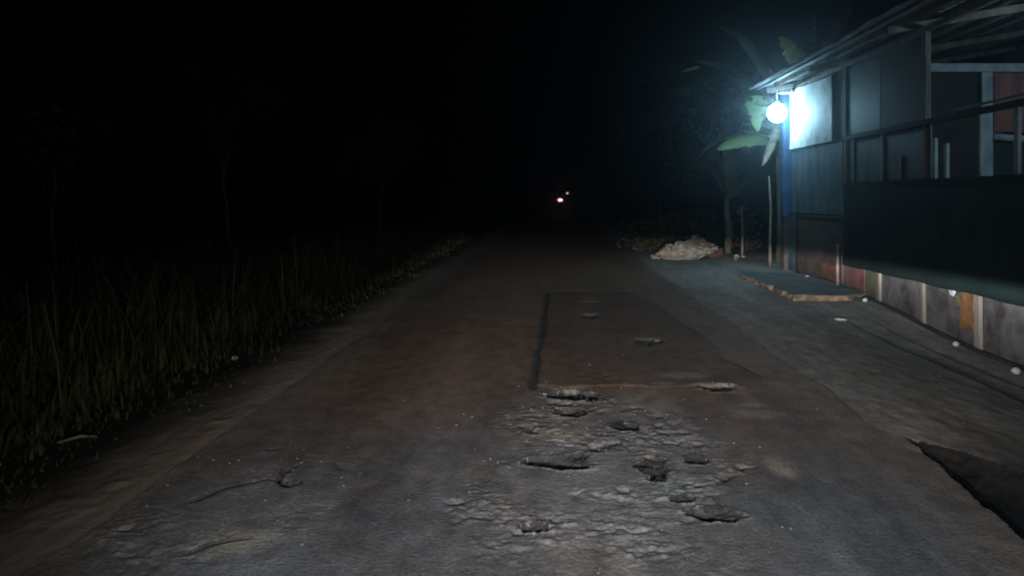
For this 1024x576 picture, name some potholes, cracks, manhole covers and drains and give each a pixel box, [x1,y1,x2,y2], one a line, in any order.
pothole [517,520,554,533]
pothole [696,382,742,392]
pothole [907,438,1024,540]
pothole [518,452,597,471]
pothole [682,505,751,523]
pothole [538,385,604,403]
crack [174,537,253,557]
pothole [606,421,640,431]
pothole [545,406,593,417]
crack [186,463,304,503]
pothole [632,454,672,483]
pothole [631,337,669,347]
